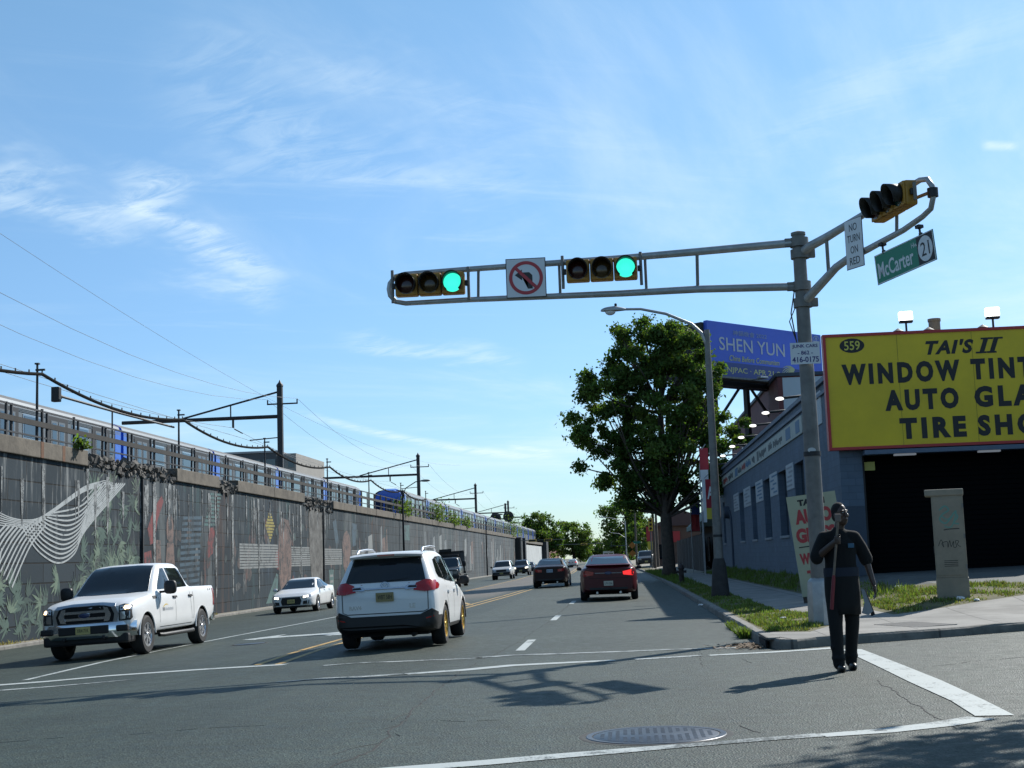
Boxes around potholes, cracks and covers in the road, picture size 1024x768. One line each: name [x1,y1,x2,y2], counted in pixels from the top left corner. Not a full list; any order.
manhole cover [579,725,734,746]
crack [877,680,955,728]
